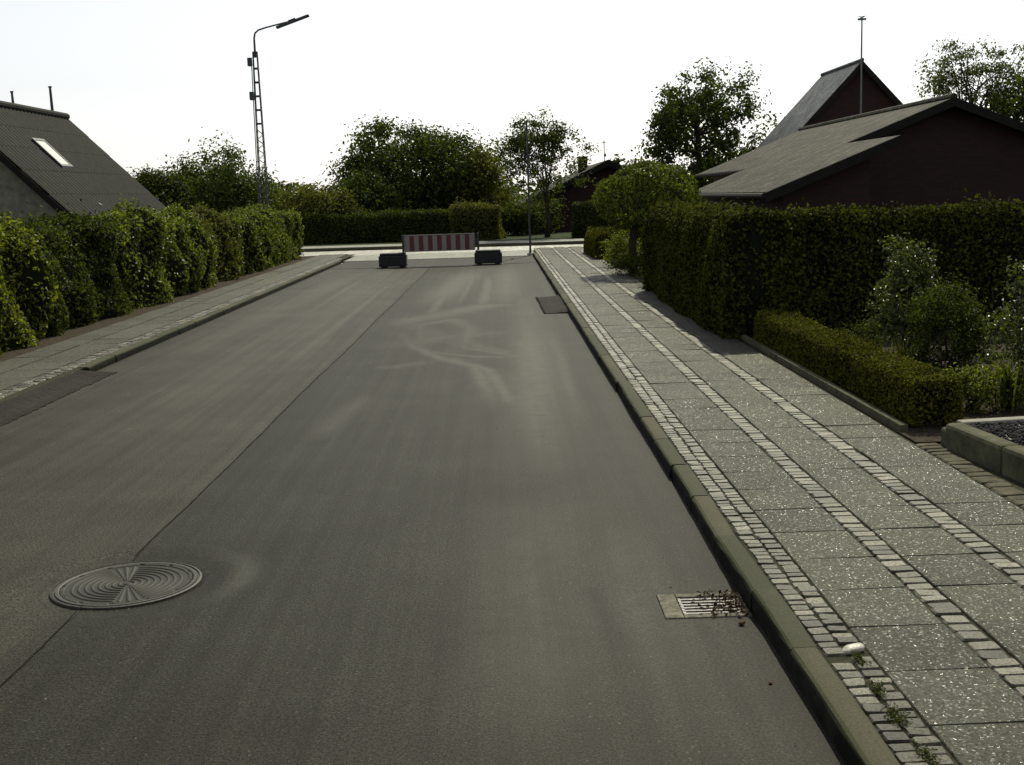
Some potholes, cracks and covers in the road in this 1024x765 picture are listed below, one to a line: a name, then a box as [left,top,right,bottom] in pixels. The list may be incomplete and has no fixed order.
manhole cover [49,561,202,610]
drain grate [657,592,753,620]
